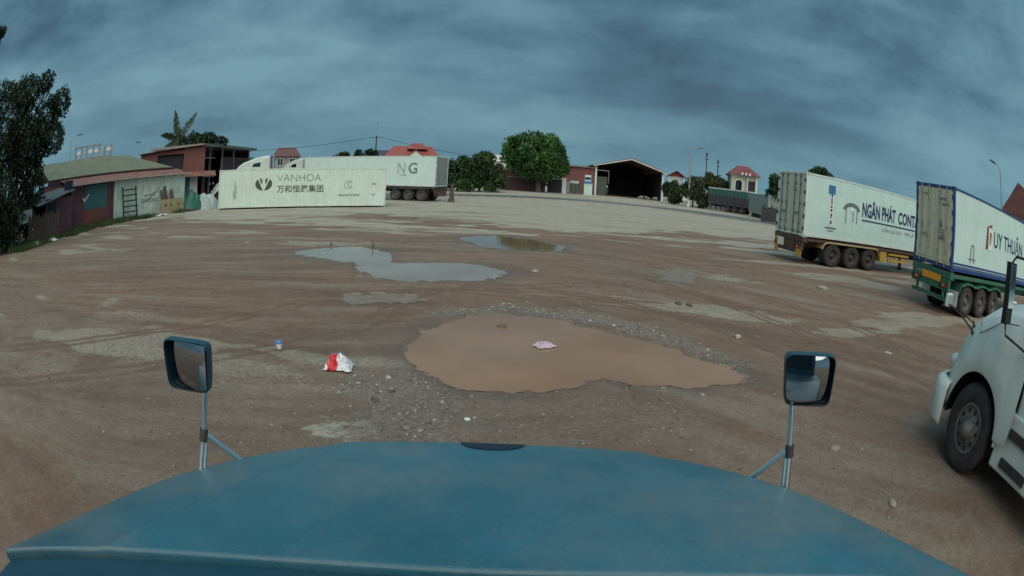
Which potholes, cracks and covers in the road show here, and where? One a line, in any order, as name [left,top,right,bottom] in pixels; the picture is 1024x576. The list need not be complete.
pothole [398,312,757,393]
pothole [292,246,508,282]
pothole [459,235,567,252]
